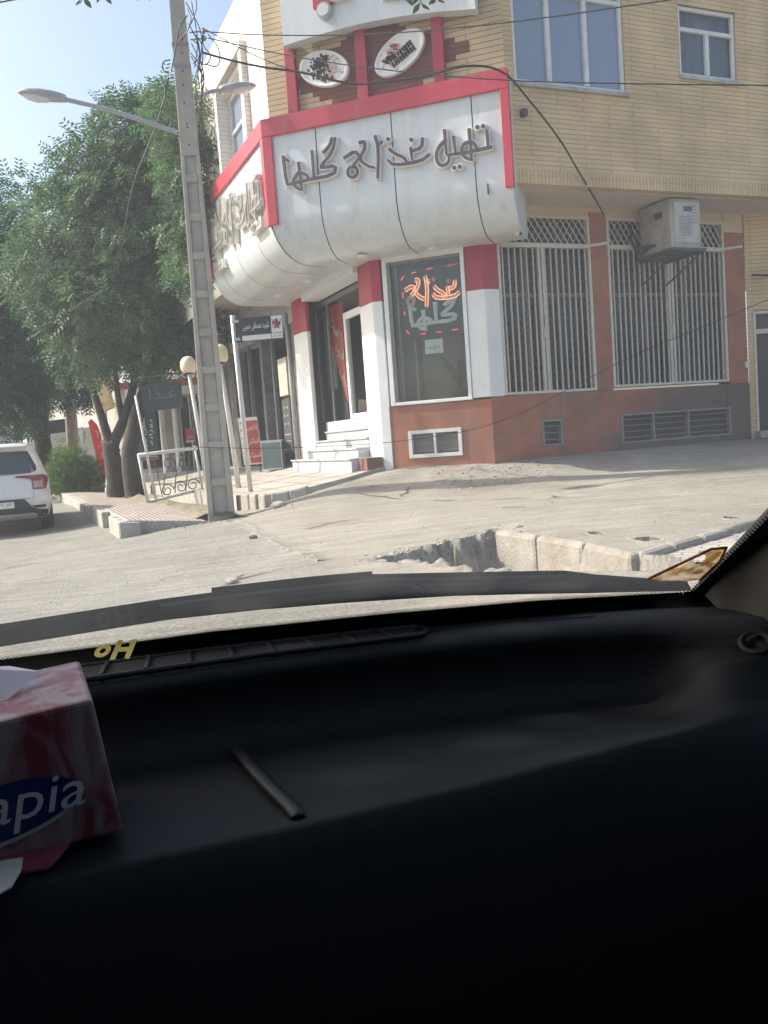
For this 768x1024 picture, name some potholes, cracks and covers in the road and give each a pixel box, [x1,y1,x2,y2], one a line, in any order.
pothole [629,535,666,543]
crack [359,486,454,501]
